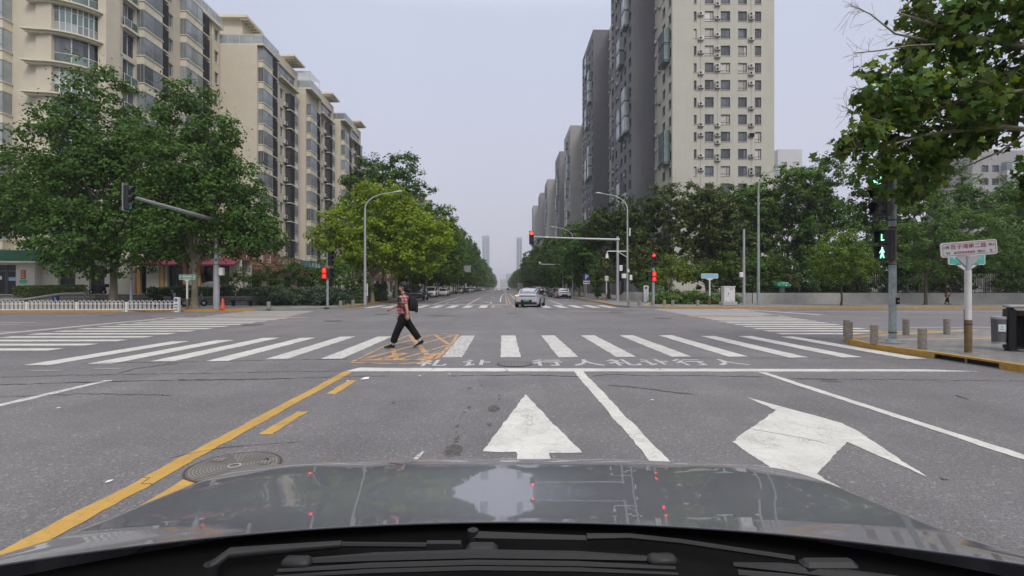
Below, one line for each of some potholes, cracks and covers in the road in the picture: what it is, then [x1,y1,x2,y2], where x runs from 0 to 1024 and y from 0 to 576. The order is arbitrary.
manhole cover [182,451,282,482]
